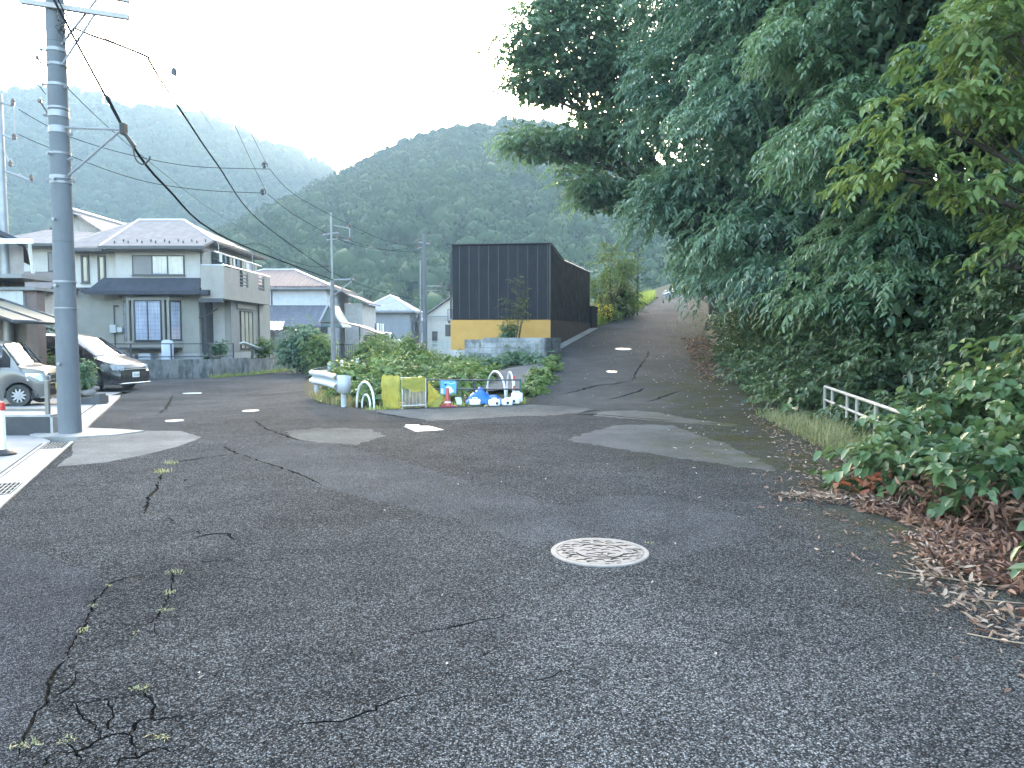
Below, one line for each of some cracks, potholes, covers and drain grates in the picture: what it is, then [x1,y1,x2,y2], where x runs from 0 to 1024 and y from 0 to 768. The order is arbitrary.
crack [18,561,212,766]
crack [139,455,236,540]
crack [565,352,676,421]
manhole cover [551,538,649,567]
crack [304,695,417,724]
